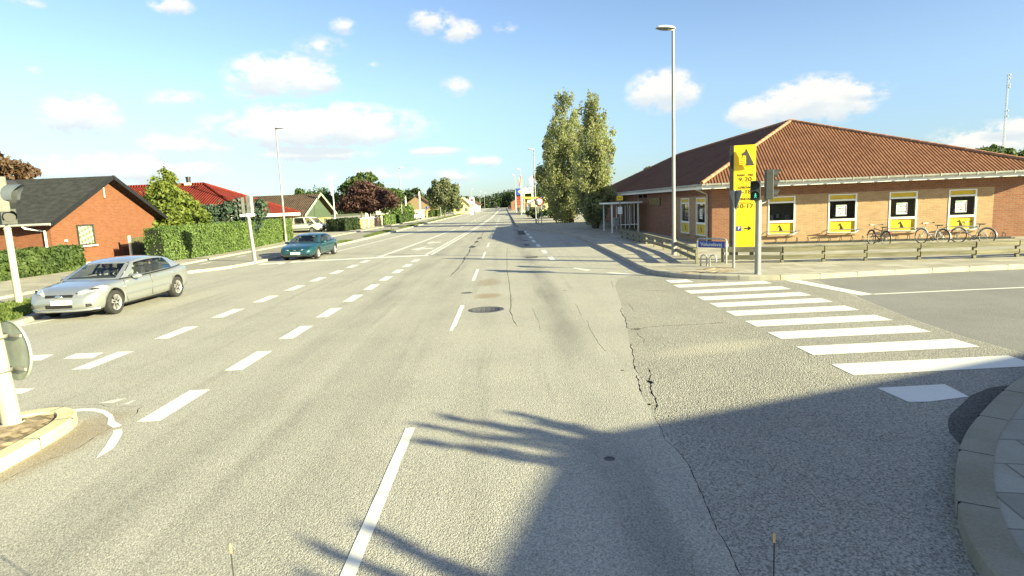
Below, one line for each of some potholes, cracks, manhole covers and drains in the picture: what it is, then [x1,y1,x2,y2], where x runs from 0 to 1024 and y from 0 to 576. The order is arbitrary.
crack [506,250,540,327]
crack [621,307,742,576]
